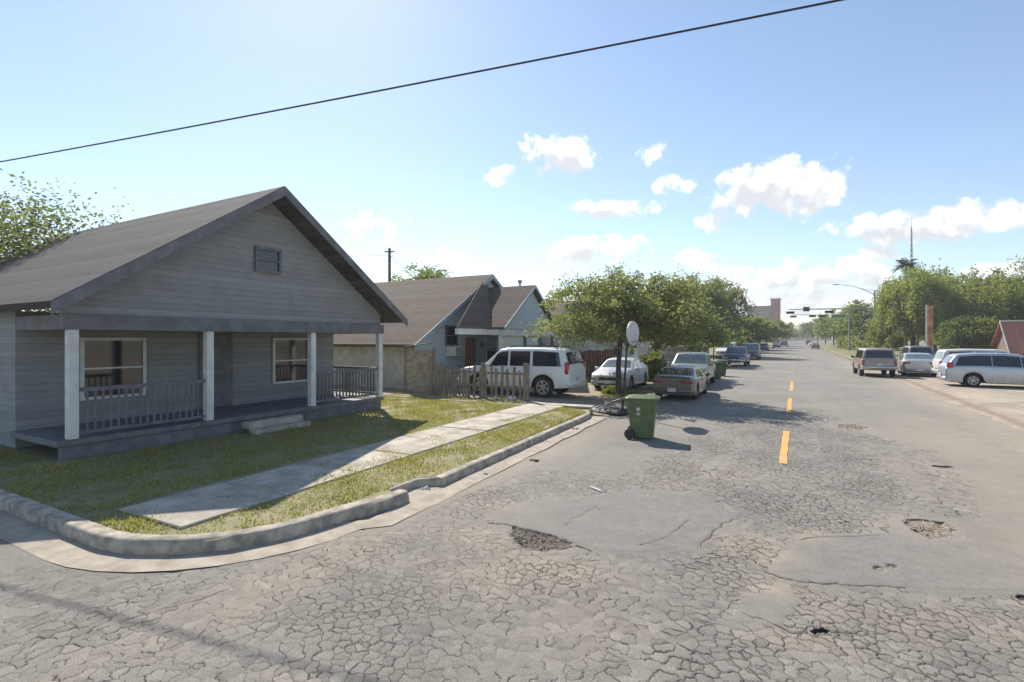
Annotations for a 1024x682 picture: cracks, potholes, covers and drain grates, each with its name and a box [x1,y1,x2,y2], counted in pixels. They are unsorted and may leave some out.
crack [641,519,733,546]
crack [619,405,980,540]
crack [641,531,1024,682]
pothole [807,626,835,636]
pothole [507,526,576,552]
crack [0,531,384,682]
crack [62,522,656,682]
pothole [902,518,956,539]
